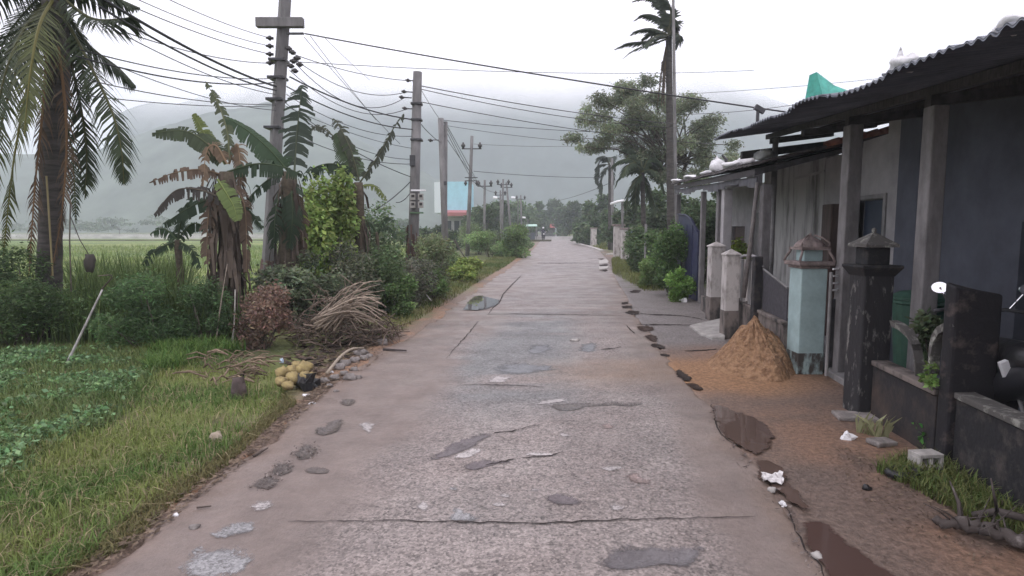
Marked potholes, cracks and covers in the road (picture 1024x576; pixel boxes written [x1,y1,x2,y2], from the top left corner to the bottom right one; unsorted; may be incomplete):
pothole [549,402,641,411]
pothole [464,460,510,470]
pothole [315,419,343,435]
pothole [272,464,293,476]
pothole [601,544,704,570]
pothole [547,494,581,505]
crack [447,277,520,357]
pothole [254,476,278,489]
pothole [431,434,493,459]
